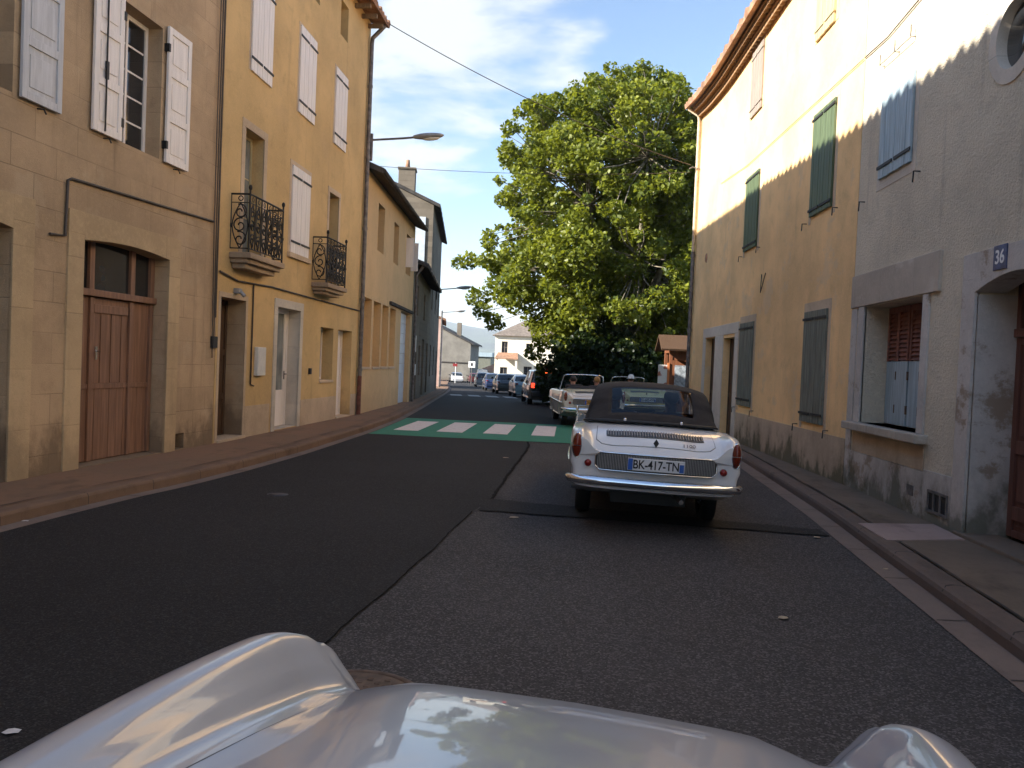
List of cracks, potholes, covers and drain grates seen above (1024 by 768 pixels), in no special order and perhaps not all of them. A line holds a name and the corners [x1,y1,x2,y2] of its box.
manhole cover [347,669,414,690]
